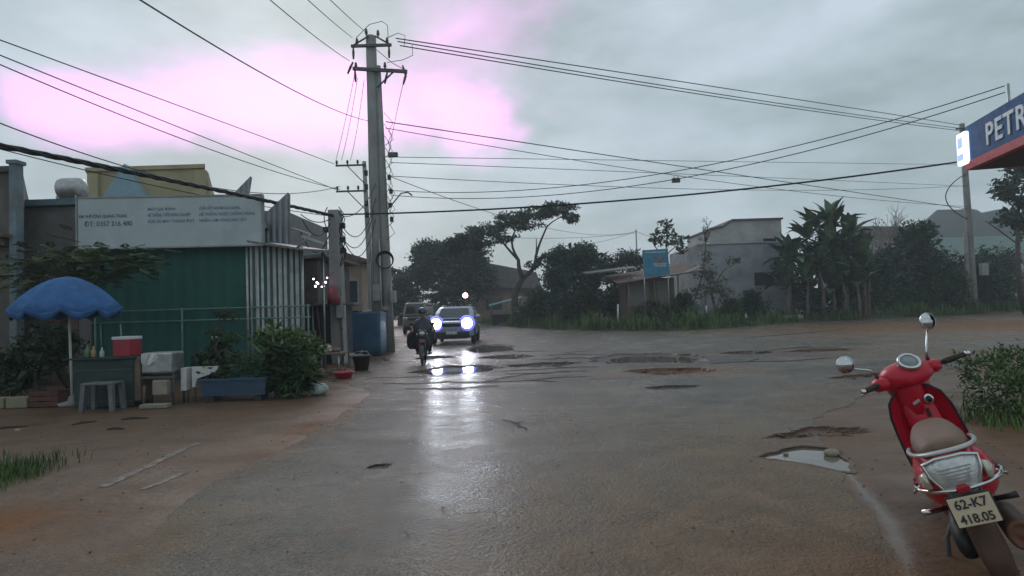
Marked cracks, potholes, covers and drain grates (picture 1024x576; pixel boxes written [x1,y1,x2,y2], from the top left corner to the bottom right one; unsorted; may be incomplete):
pothole [584,353,715,364]
pothole [620,367,722,375]
pothole [406,365,507,376]
pothole [752,444,858,474]
pothole [761,425,873,439]
pothole [464,344,519,353]
